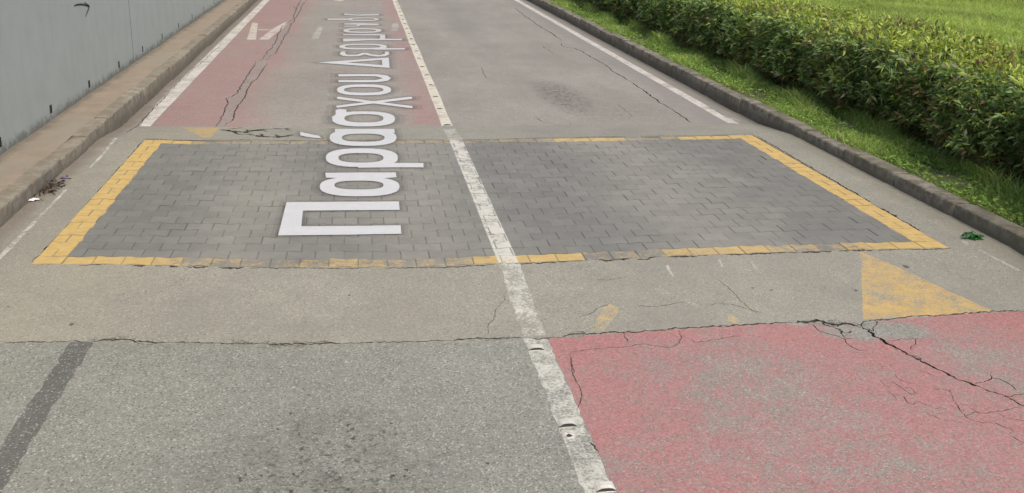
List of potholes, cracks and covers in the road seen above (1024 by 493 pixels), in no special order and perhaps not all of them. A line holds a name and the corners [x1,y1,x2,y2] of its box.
crack [515,248,950,317]
crack [860,321,1024,443]
crack [32,0,919,261]
crack [567,331,743,452]
